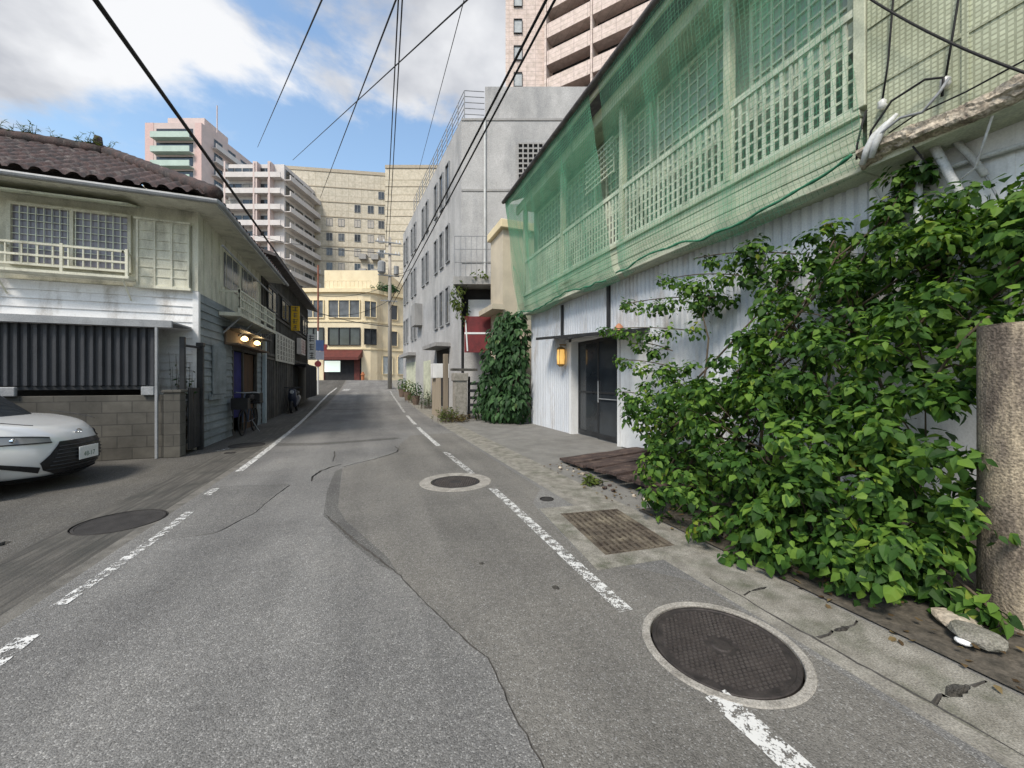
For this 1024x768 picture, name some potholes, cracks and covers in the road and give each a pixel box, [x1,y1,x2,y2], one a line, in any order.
drain grate [539,502,704,570]
crack [279,438,399,481]
manhole cover [419,473,491,492]
crack [182,485,290,538]
manhole cover [642,602,818,710]
manhole cover [67,509,169,536]
